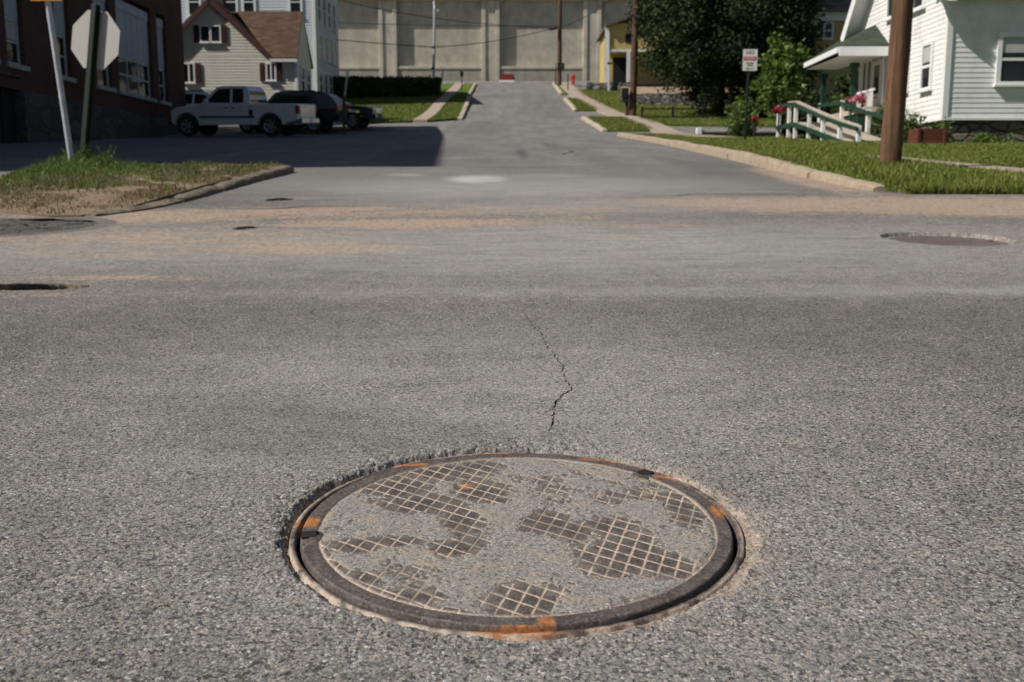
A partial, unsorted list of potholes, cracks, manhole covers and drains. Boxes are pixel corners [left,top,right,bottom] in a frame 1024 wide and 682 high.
crack [523,312,575,432]
manhole cover [287,452,745,641]
manhole cover [889,236,1008,246]
pothole [0,282,108,292]
